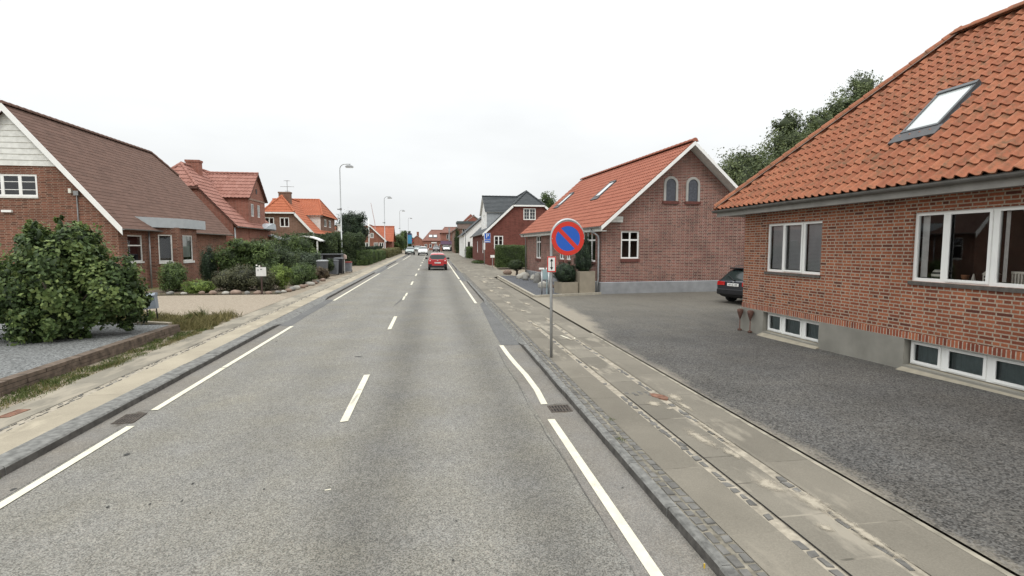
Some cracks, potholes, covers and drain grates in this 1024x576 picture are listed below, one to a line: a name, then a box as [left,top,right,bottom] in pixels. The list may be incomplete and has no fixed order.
drain grate [111,413,147,424]
